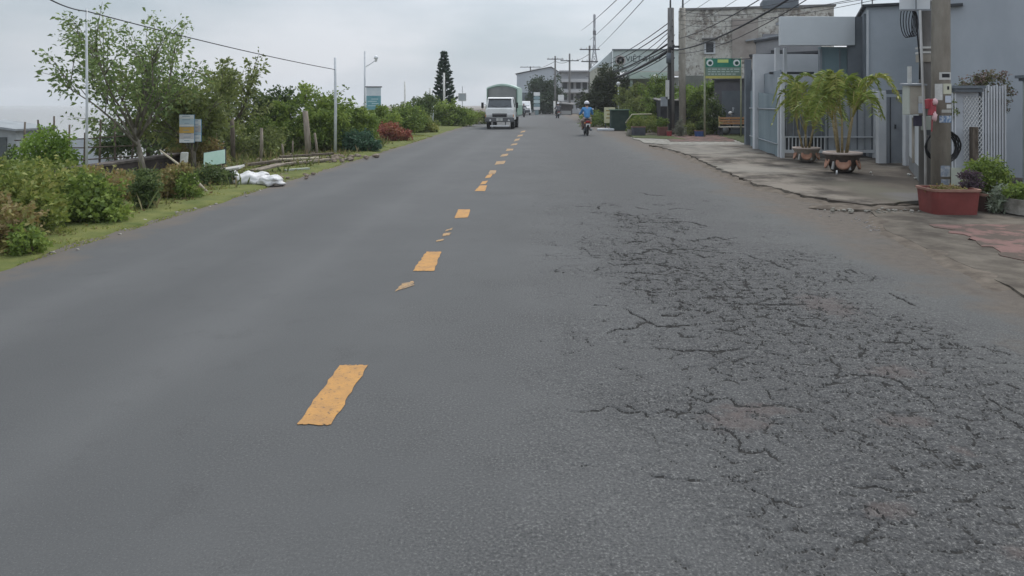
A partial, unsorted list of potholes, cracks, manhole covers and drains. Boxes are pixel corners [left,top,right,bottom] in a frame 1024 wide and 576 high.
crack [540,191,1024,576]
